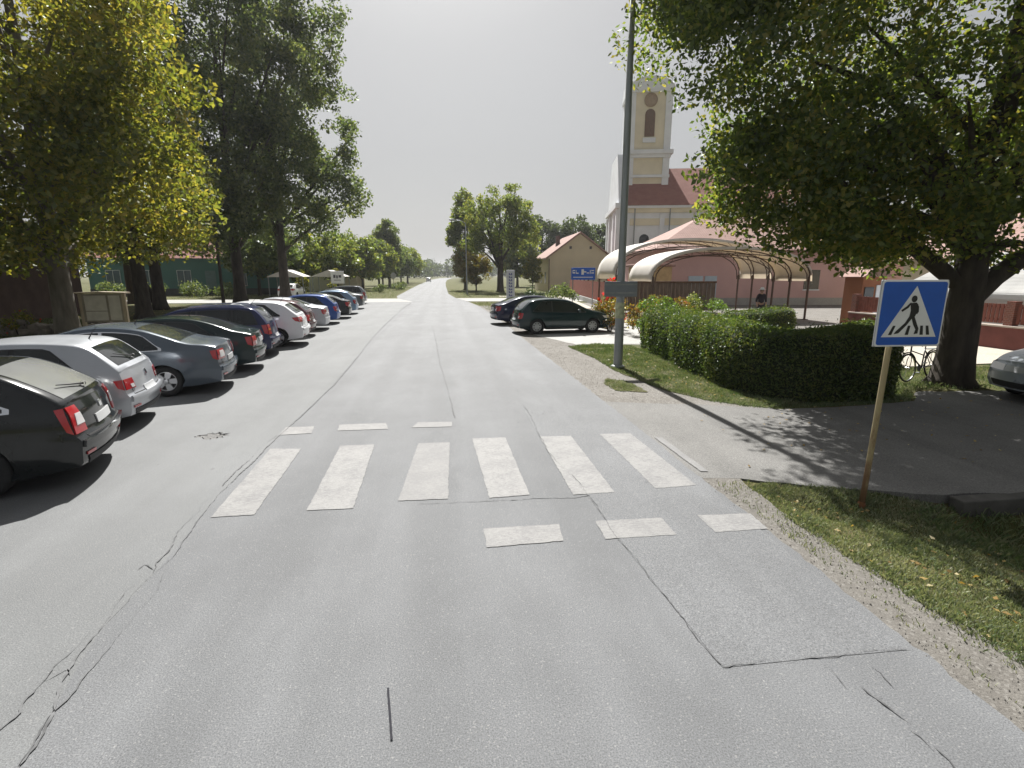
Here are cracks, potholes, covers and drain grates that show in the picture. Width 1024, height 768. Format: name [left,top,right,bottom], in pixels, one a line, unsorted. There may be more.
pothole [195,432,228,440]
crack [437,398,956,768]
crack [0,303,411,768]
